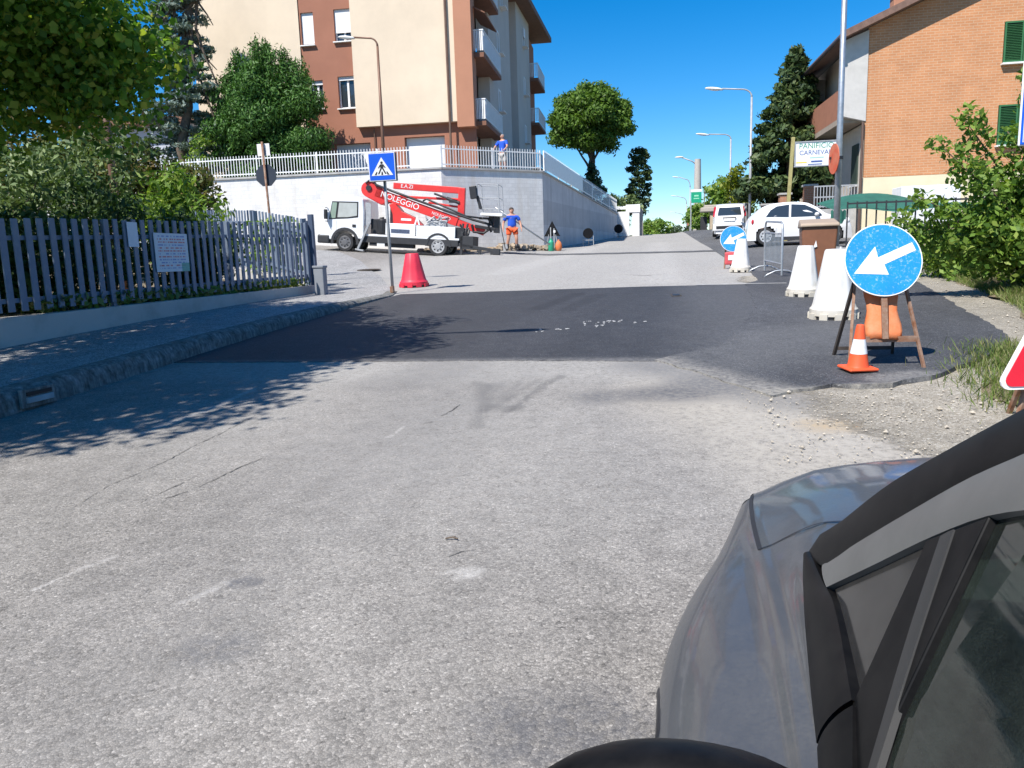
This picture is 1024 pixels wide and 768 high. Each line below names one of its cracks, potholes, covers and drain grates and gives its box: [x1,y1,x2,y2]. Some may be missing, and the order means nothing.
crack [146,459,259,499]
drain grate [18,383,56,409]
